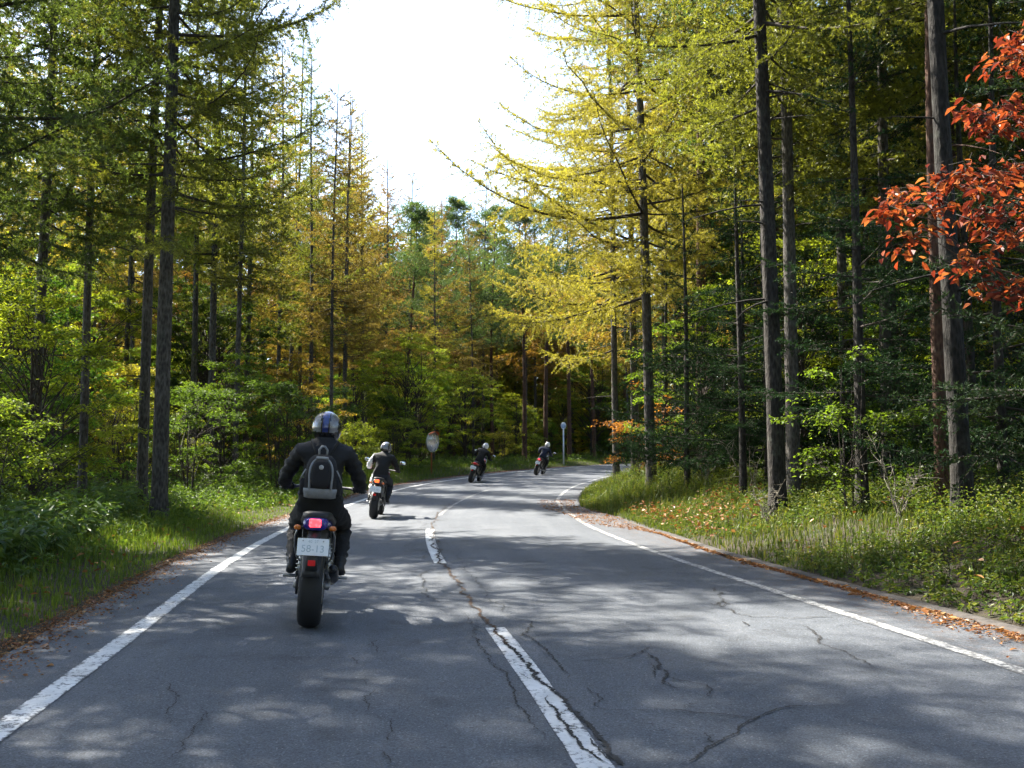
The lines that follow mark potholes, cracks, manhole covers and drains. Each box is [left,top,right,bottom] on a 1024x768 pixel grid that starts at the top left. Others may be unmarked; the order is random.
crack [591,645,827,766]
crack [352,639,393,763]
crack [446,543,603,708]
crack [163,681,208,759]
crack [711,587,878,669]
crack [461,611,544,733]
